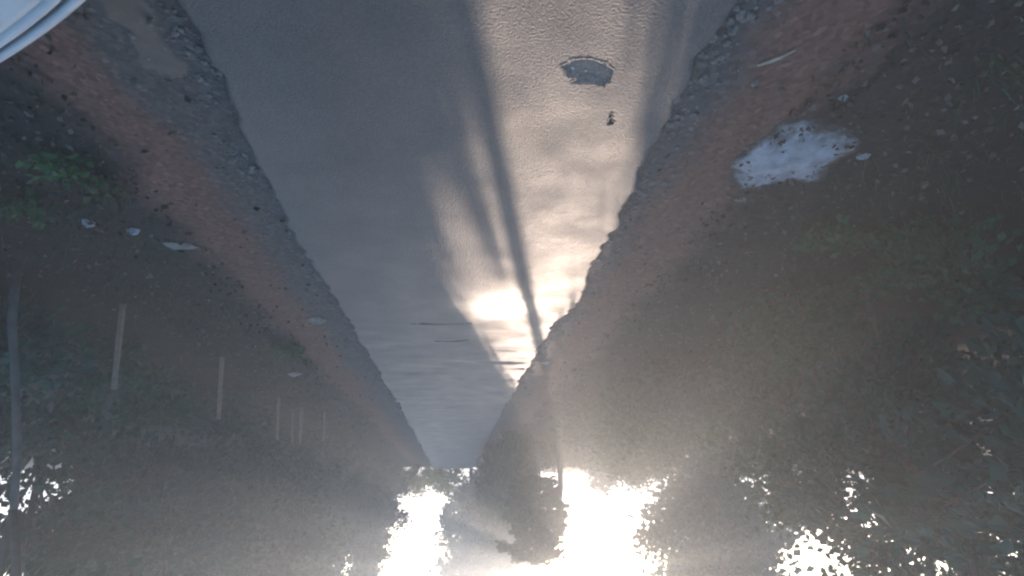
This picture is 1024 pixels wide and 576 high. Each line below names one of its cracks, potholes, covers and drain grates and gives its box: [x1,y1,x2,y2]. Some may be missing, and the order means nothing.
crack [392,323,476,342]
pothole [558,57,617,88]
